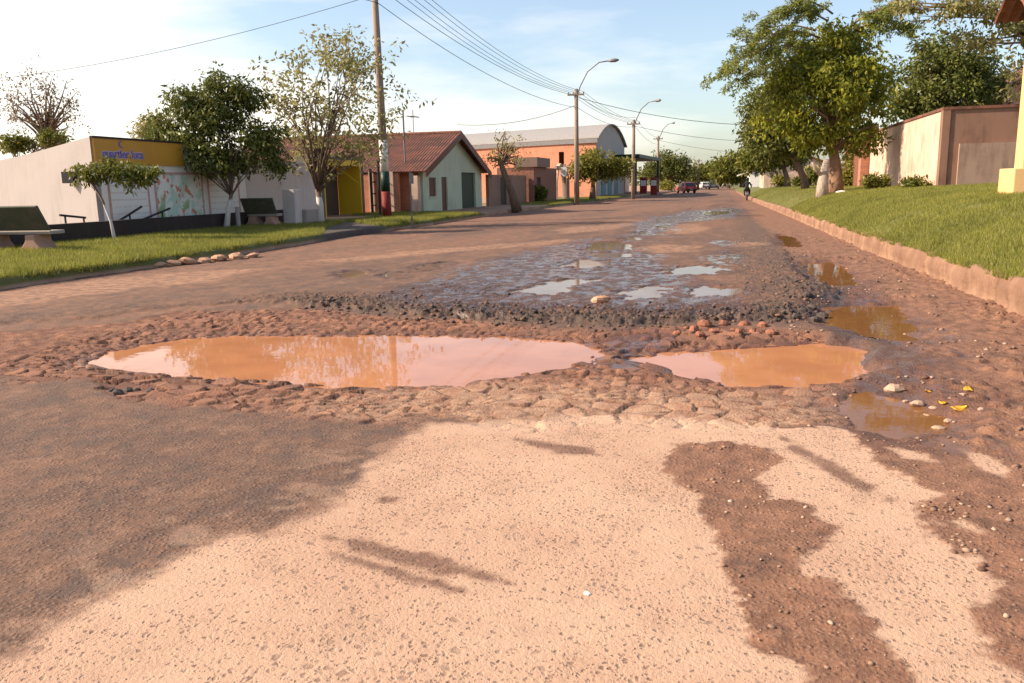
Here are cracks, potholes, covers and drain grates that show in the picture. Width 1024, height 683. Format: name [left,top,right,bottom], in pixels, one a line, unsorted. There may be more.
pothole [804,383,976,444]
pothole [792,258,869,286]
pothole [41,325,633,395]
pothole [502,277,606,296]
pothole [772,233,810,247]
pothole [577,250,644,259]
pothole [548,258,620,269]
pothole [803,299,935,342]
pothole [573,240,645,252]
pothole [647,264,742,276]
